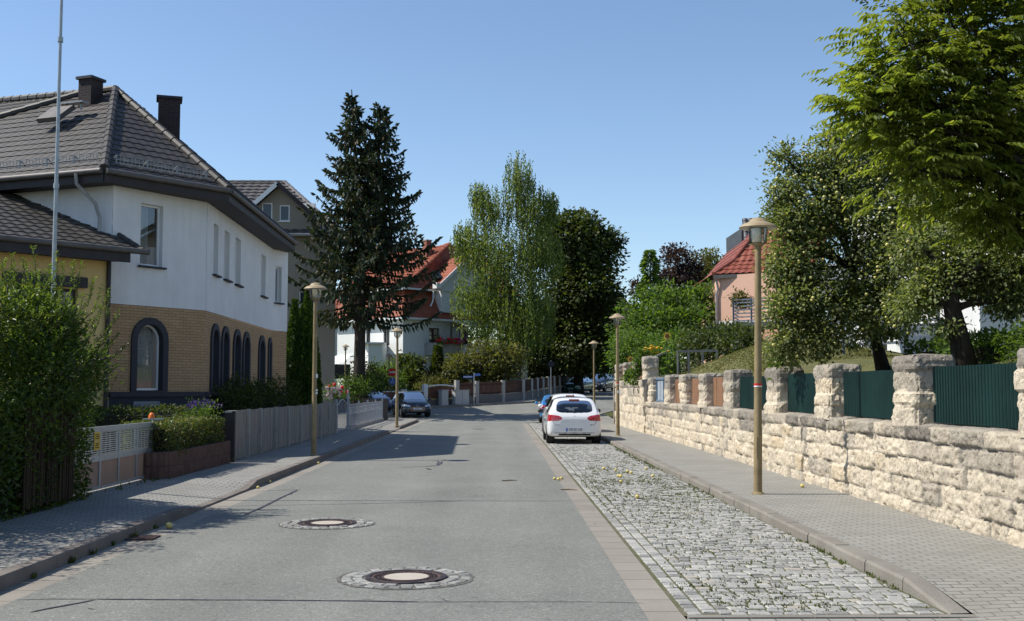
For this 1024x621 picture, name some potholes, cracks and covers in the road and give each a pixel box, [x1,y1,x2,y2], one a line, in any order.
manhole cover [278,517,376,529]
manhole cover [336,566,474,590]
